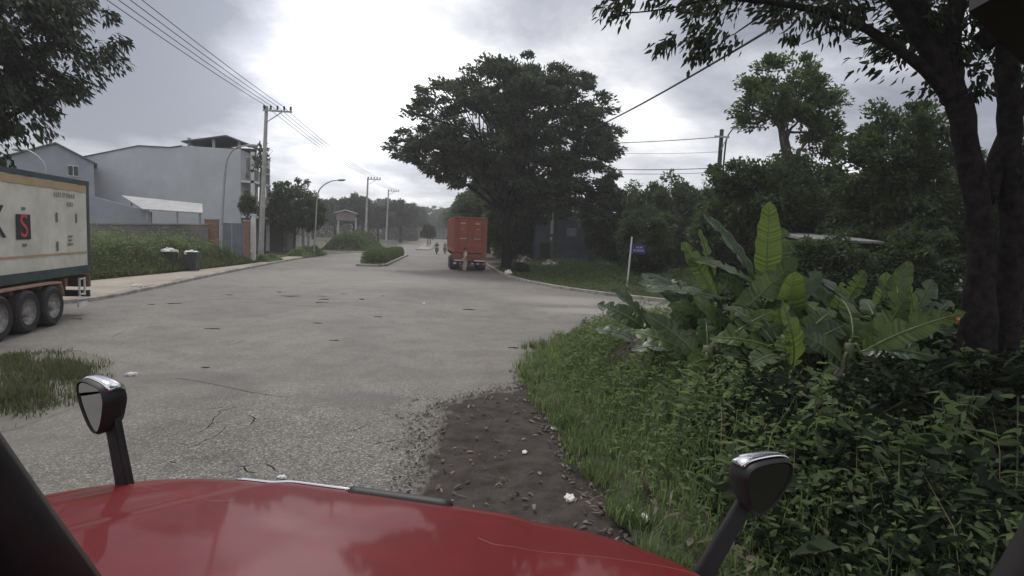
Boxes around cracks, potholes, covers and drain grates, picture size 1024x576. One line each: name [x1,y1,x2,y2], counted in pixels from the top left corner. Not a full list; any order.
crack [169,405,256,463]
